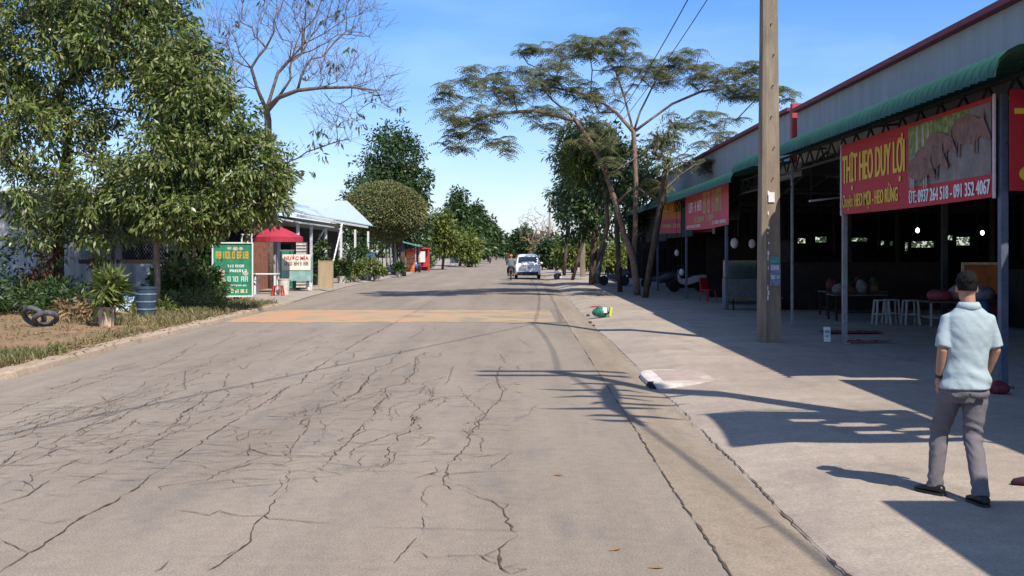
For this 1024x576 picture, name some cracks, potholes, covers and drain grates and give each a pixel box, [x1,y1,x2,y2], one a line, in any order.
crack [0,304,427,572]
